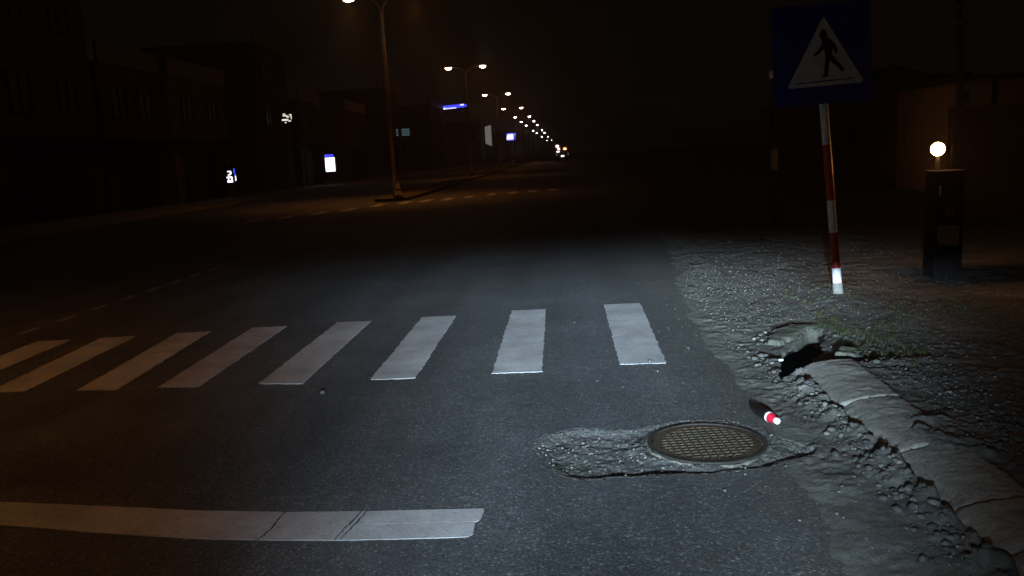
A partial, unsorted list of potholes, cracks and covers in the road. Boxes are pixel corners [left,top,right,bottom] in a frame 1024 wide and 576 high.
manhole cover [645,423,770,468]
crack [335,510,368,539]
